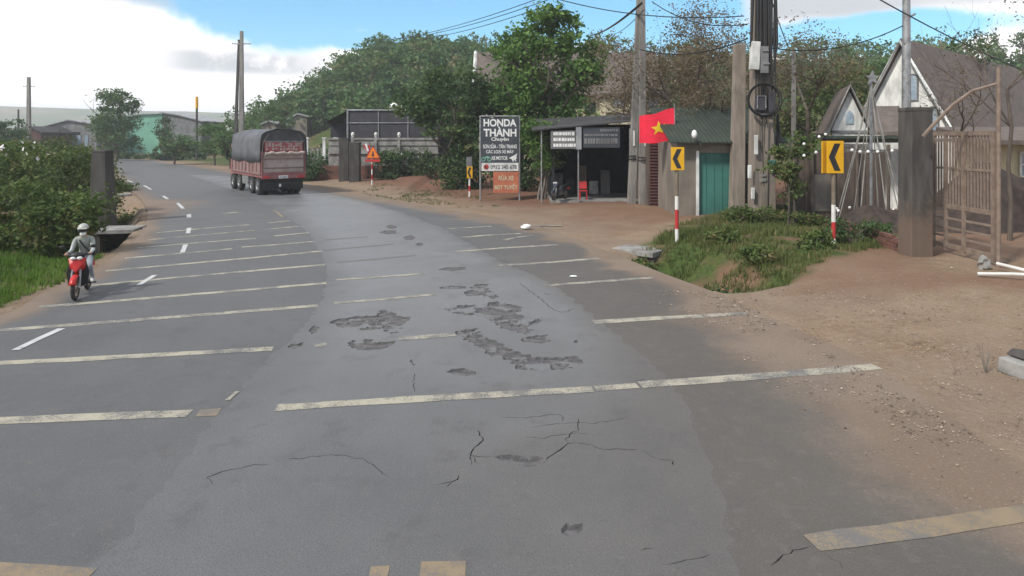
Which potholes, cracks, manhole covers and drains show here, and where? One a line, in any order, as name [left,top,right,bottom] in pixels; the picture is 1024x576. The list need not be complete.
pothole [330,310,412,333]
pothole [455,328,583,371]
pothole [347,339,396,350]
pothole [561,523,583,536]
pothole [464,284,499,299]
crack [206,454,390,484]
pothole [444,301,542,334]
pothole [447,368,478,376]
crack [437,414,674,486]
crack [770,546,810,566]
